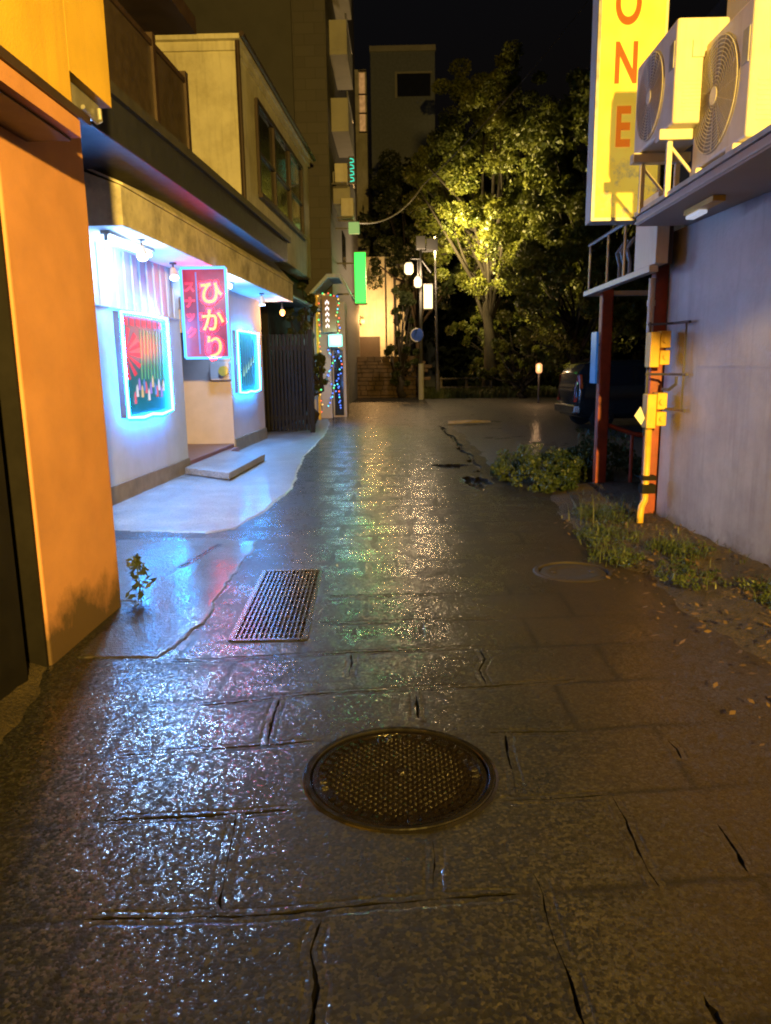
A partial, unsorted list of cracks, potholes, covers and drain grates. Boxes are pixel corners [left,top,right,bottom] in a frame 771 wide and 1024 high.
drain grate [228,569,323,642]
crack [434,426,486,472]
manhole cover [302,727,499,834]
manhole cover [533,561,613,583]
crack [82,618,666,1024]
pothole [460,475,496,491]
crack [709,822,757,877]
